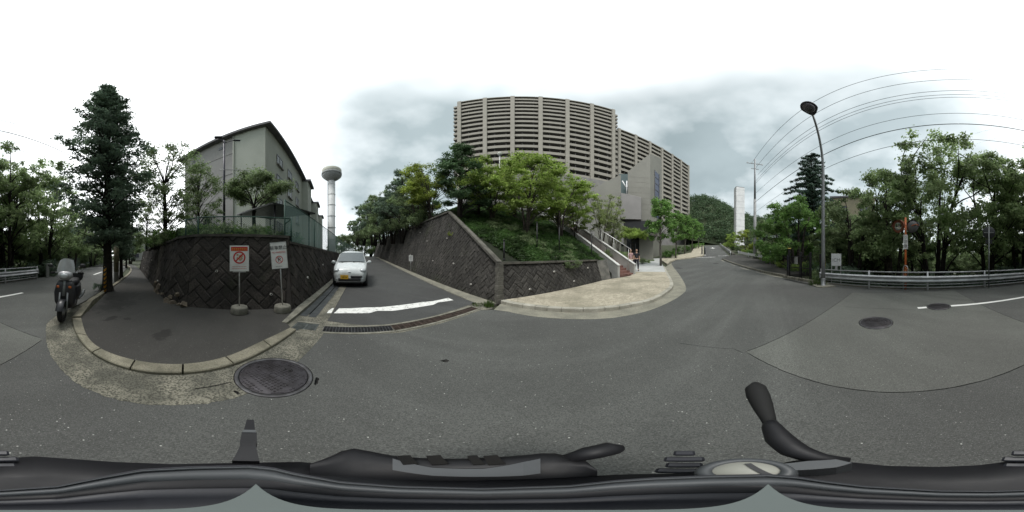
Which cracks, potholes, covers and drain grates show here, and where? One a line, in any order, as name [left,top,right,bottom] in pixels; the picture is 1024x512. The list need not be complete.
drain grate [322,324,394,334]
manhole cover [234,358,313,398]
drain grate [390,306,479,332]
drain grate [291,321,320,334]
manhole cover [859,317,893,329]
